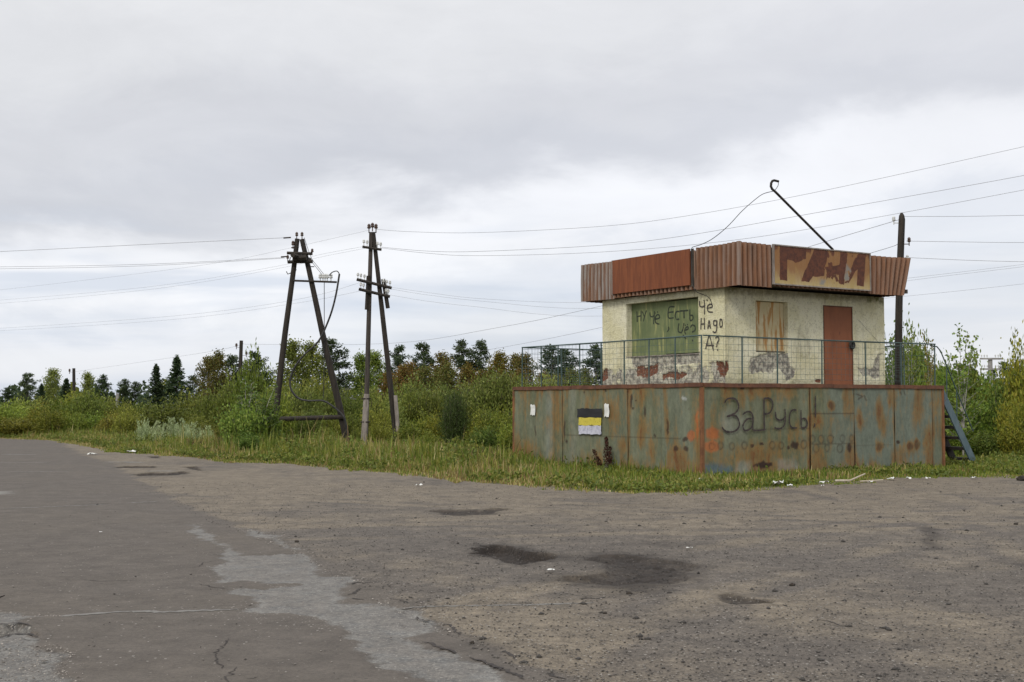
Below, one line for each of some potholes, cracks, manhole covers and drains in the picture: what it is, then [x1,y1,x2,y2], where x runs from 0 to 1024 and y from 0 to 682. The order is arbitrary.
crack [214,638,255,681]
pothole [703,592,791,606]
pothole [412,507,521,517]
pothole [0,621,53,643]
pothole [542,553,716,588]
pothole [455,544,570,567]
